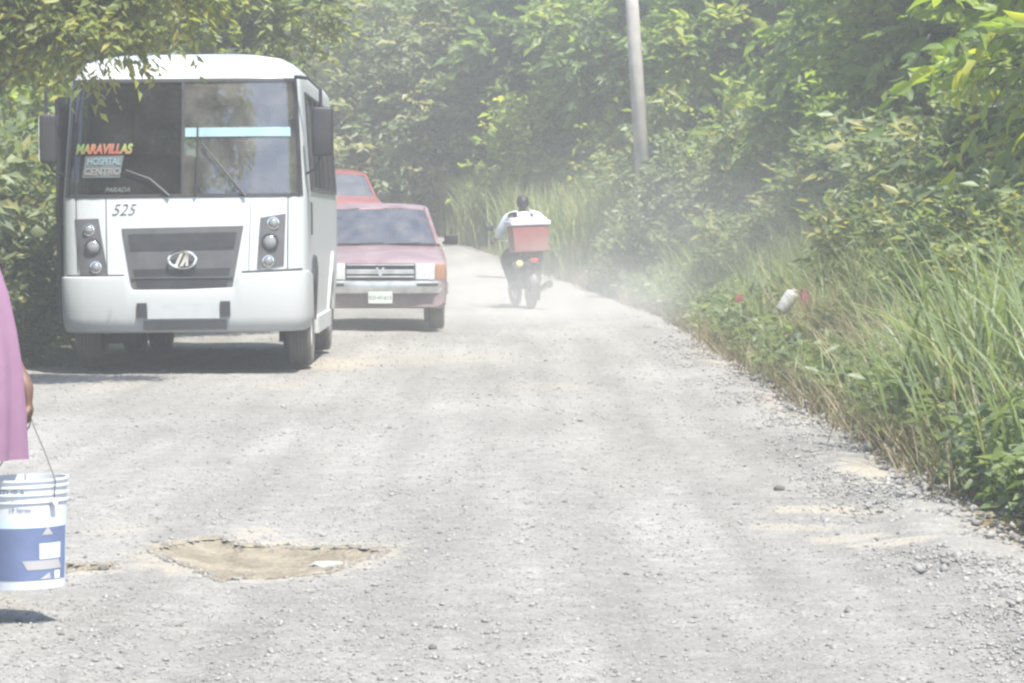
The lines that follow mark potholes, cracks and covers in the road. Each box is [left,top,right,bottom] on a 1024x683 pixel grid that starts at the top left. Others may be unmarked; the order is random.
pothole [66,561,122,571]
pothole [146,536,390,581]
